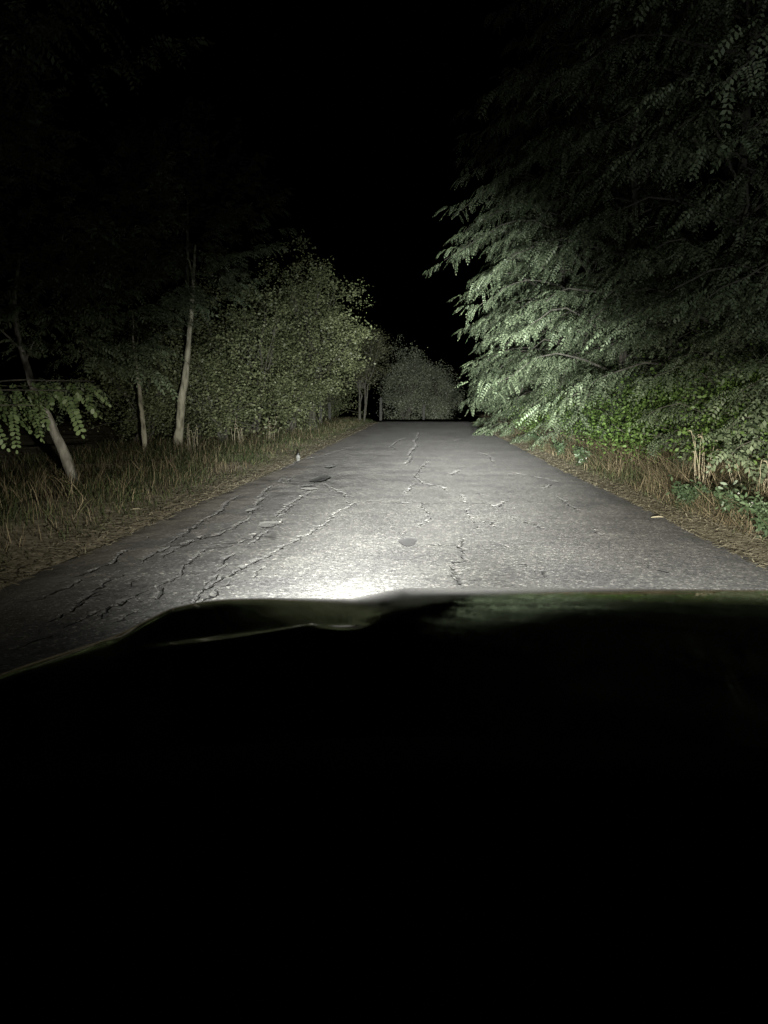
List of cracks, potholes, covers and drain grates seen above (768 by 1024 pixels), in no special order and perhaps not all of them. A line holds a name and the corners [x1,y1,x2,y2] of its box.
crack [454,439,614,539]
crack [388,432,549,588]
crack [14,446,357,650]
pothole [309,475,331,483]
pothole [398,538,417,546]
